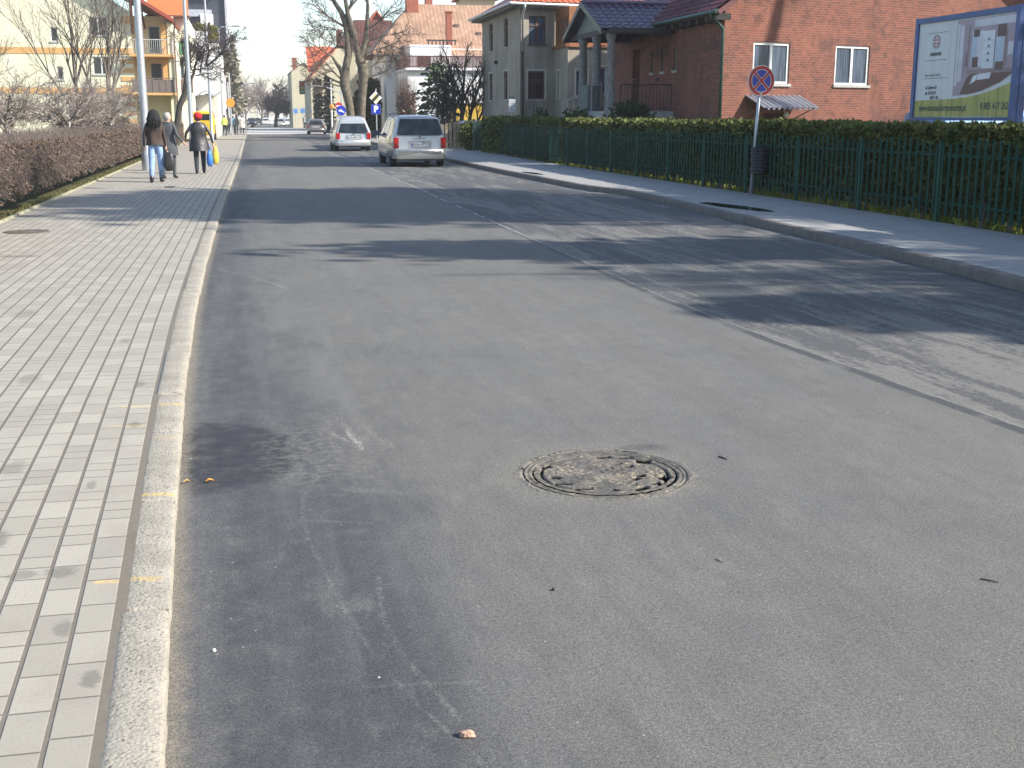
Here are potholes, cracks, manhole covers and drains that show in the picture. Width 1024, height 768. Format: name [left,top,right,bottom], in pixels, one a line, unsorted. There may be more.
manhole cover [513,448,699,502]
